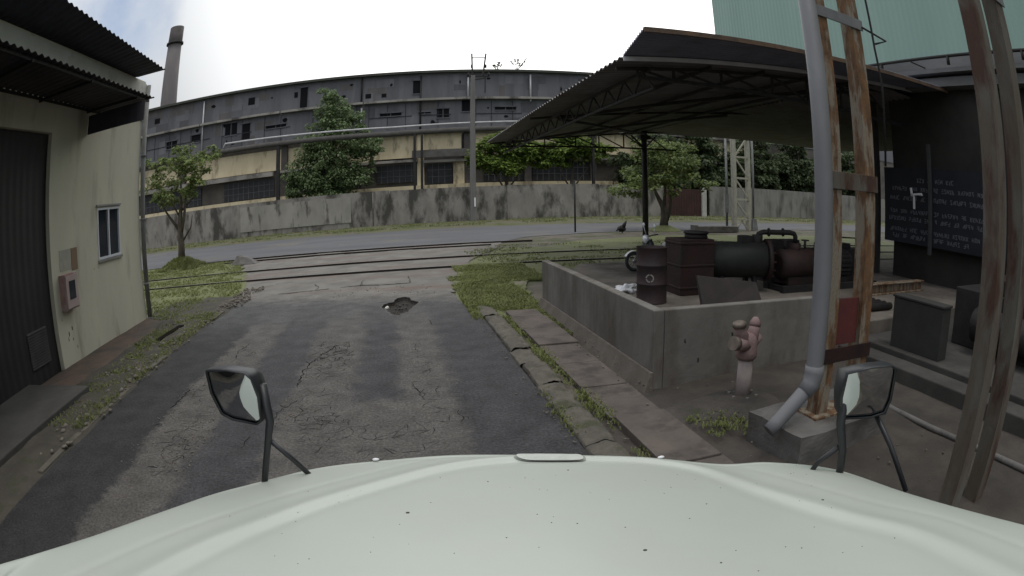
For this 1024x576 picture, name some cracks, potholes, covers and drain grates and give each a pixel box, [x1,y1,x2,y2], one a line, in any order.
crack [272,340,469,463]
pothole [380,296,420,317]
